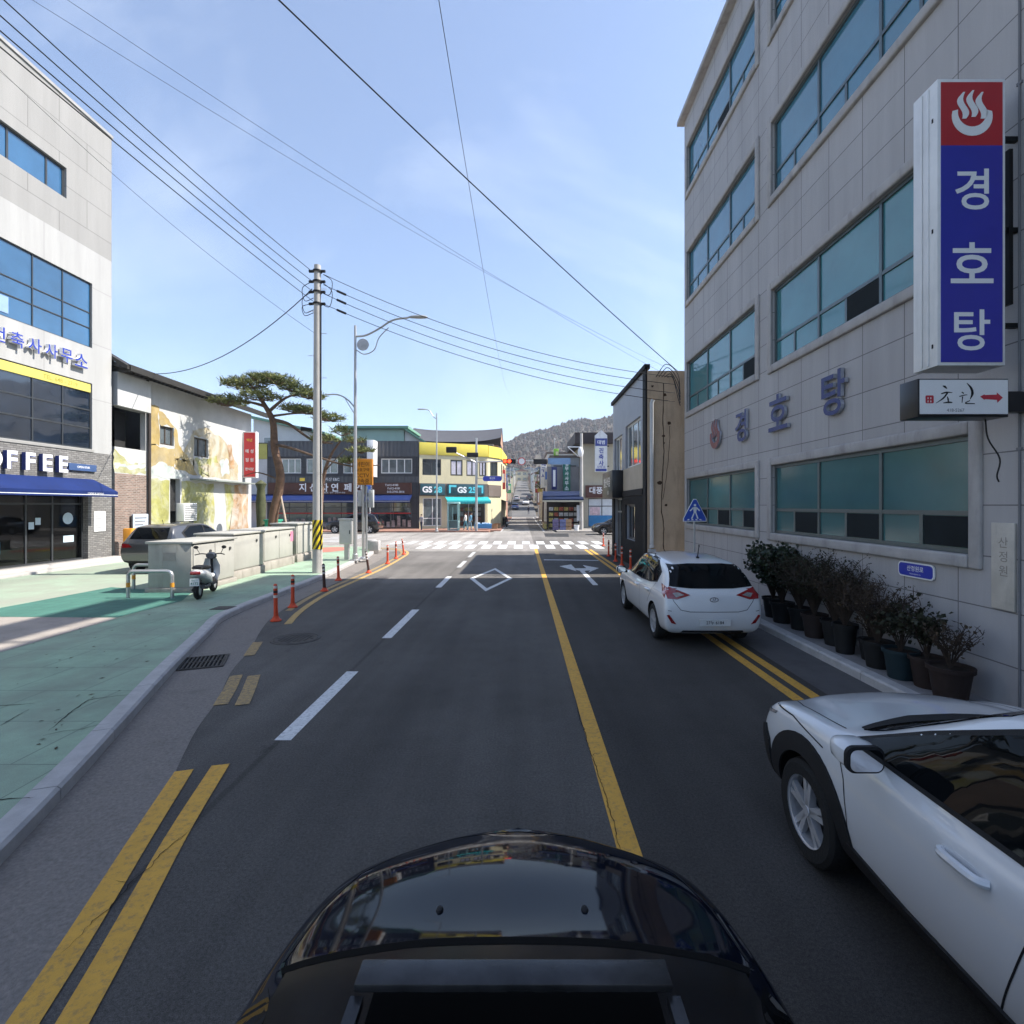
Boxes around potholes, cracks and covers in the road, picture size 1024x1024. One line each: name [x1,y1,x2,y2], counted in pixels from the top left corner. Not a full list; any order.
crack [43,695,120,736]
manhole cover [270,632,321,645]
crack [61,824,199,953]
crack [573,695,620,847]
drain grate [176,653,230,671]
